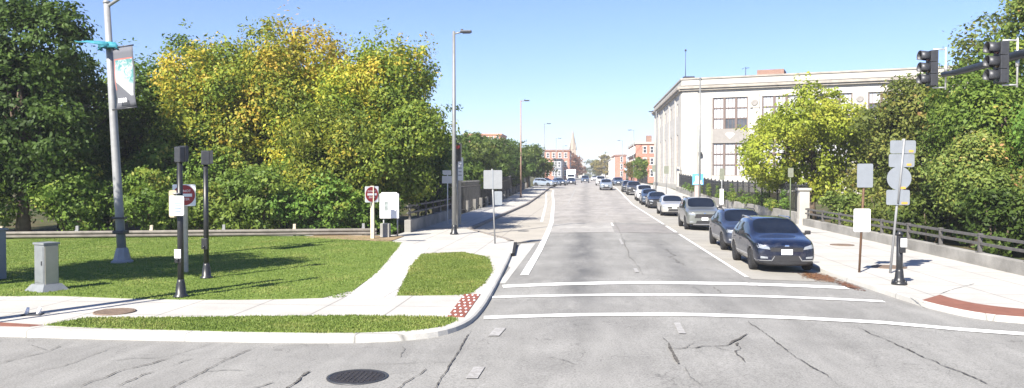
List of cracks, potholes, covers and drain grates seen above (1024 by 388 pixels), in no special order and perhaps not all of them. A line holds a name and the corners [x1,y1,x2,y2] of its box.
manhole cover [326,369,389,385]
crack [252,370,311,388]
crack [865,330,997,388]
crack [1,342,247,388]
manhole cover [93,308,136,316]
crack [748,321,831,378]
